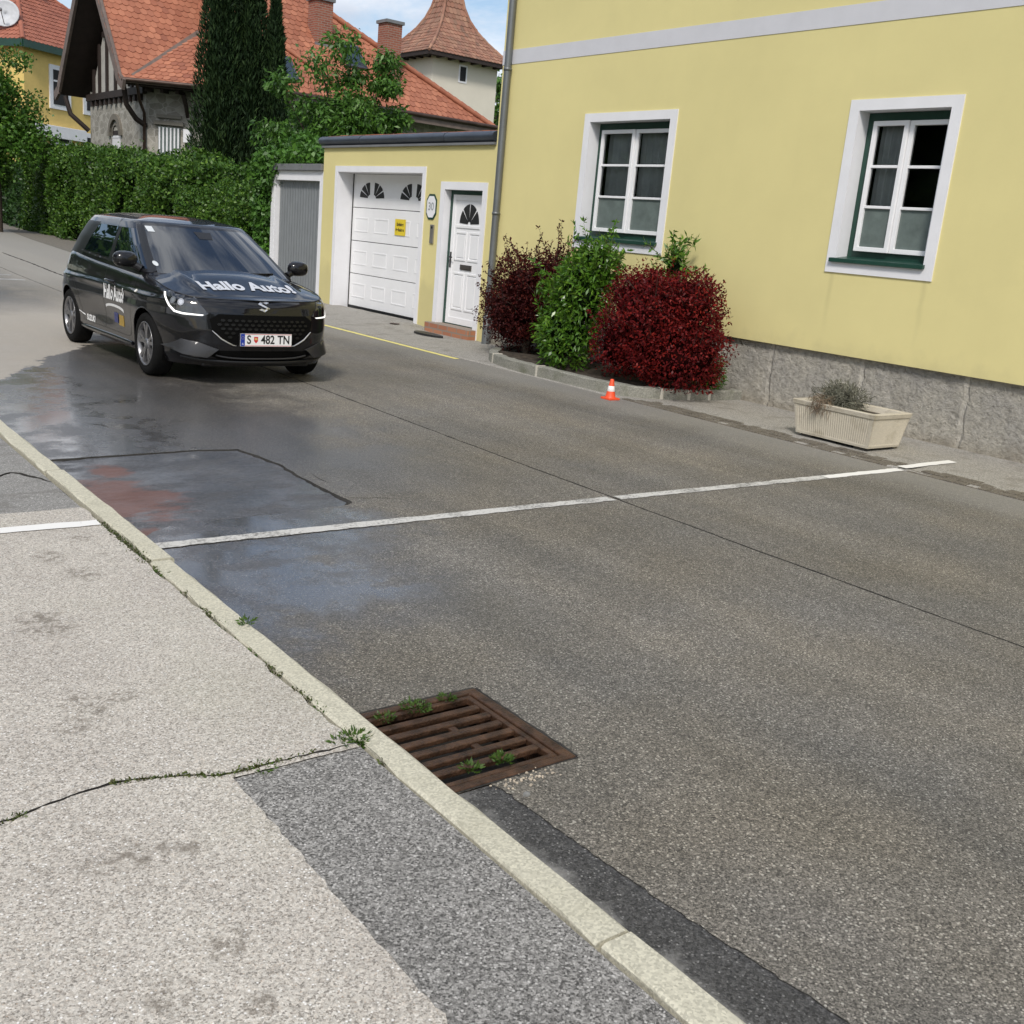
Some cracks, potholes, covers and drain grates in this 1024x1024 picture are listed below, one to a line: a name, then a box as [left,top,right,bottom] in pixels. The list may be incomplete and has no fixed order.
drain grate [359,687,579,794]
crack [0,744,350,823]
